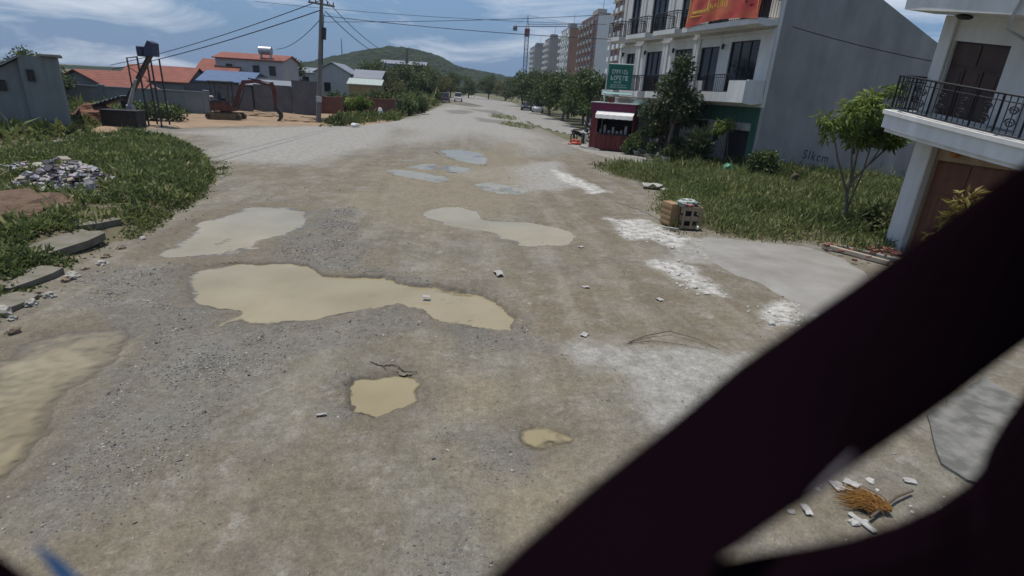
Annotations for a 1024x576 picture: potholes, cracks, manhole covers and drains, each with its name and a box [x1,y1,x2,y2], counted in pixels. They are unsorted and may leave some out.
pothole [376,168,460,183]
pothole [400,162,478,173]
pothole [127,200,333,266]
pothole [403,204,588,250]
pothole [155,258,528,341]
pothole [326,363,447,429]
pothole [465,180,538,196]
crack [369,362,417,376]
pothole [432,148,492,166]
pothole [0,308,178,506]
